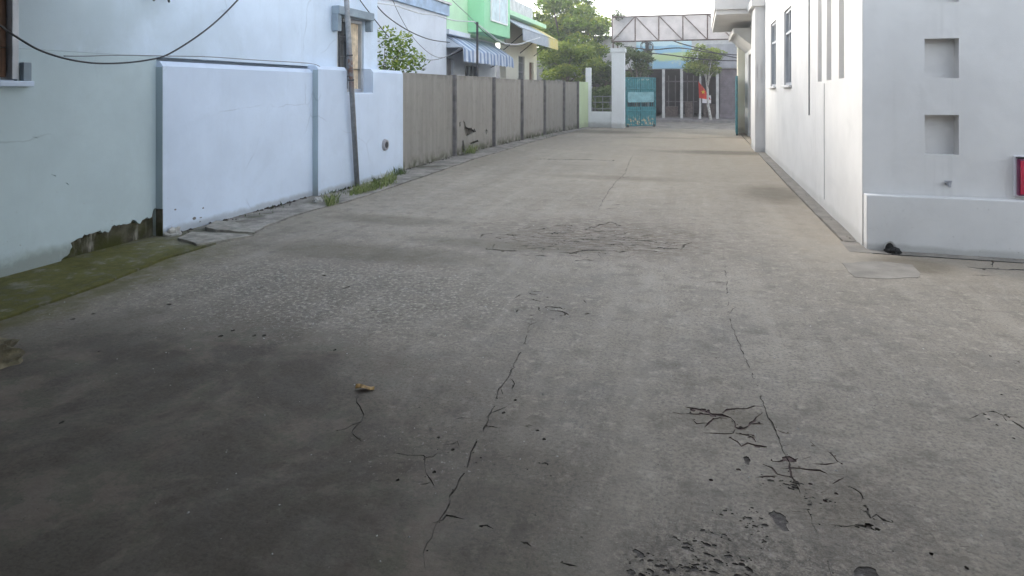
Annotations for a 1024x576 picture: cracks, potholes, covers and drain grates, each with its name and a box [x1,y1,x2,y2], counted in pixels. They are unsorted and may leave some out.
crack [396,291,589,566]
pothole [626,507,768,576]
pothole [769,510,789,531]
crack [673,406,894,555]
crack [336,399,364,441]
